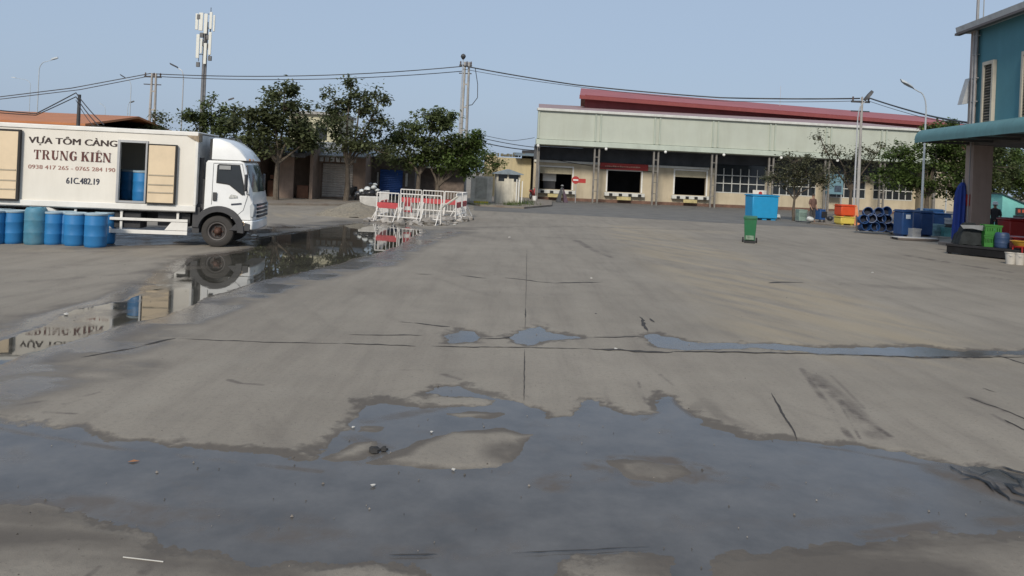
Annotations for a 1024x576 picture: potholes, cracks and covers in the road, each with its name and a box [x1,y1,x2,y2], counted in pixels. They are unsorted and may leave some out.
crack [972,389,1024,430]
crack [950,465,1024,503]
crack [198,317,1024,364]
crack [771,393,797,439]
